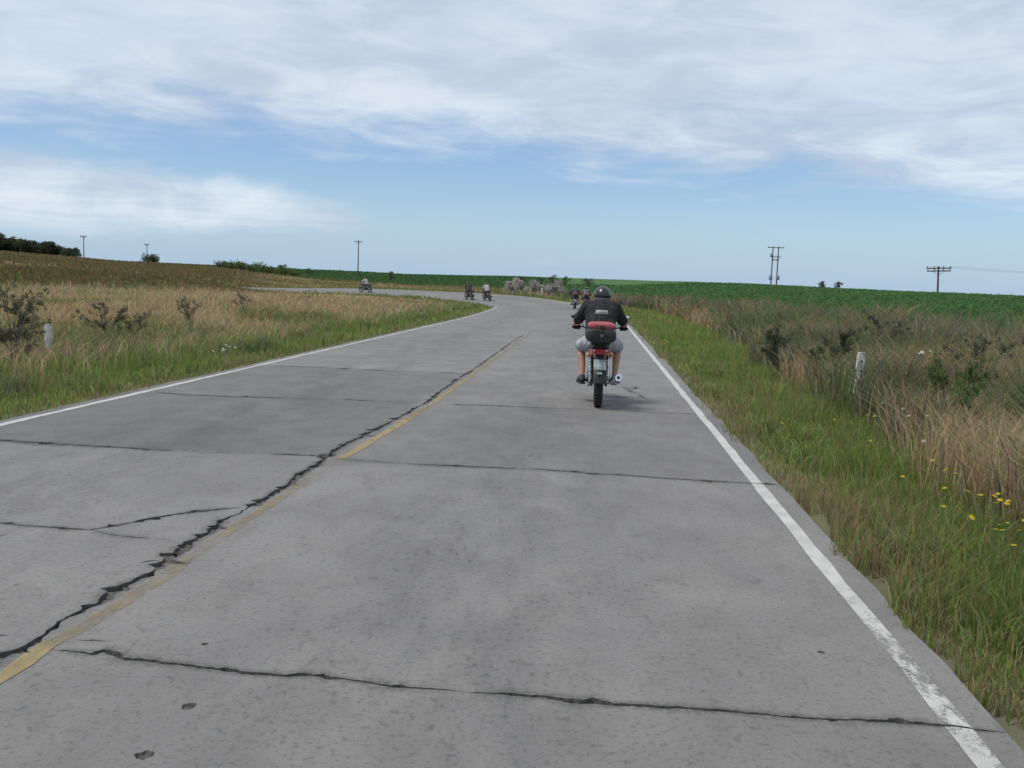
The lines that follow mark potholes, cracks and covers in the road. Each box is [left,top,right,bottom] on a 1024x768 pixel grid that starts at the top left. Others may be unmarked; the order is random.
crack [0,336,1006,733]
pothole [134,750,155,760]
